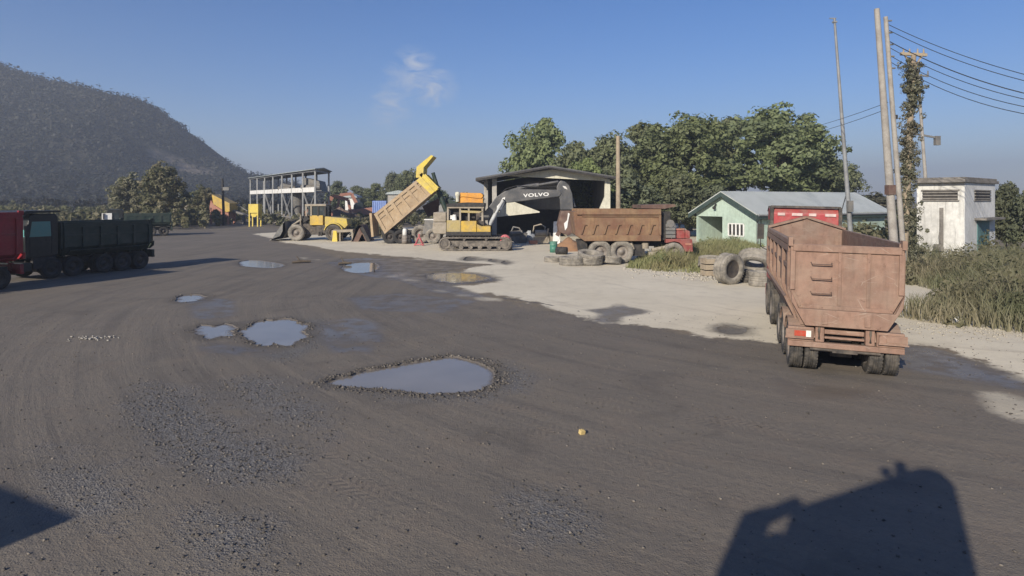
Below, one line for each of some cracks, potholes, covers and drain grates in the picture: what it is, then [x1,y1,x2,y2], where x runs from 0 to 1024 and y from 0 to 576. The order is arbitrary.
pothole [300,353,524,402]
pothole [174,294,215,302]
pothole [173,323,239,340]
pothole [238,260,285,268]
pothole [426,272,496,283]
pothole [225,317,320,349]
pothole [338,262,380,273]
